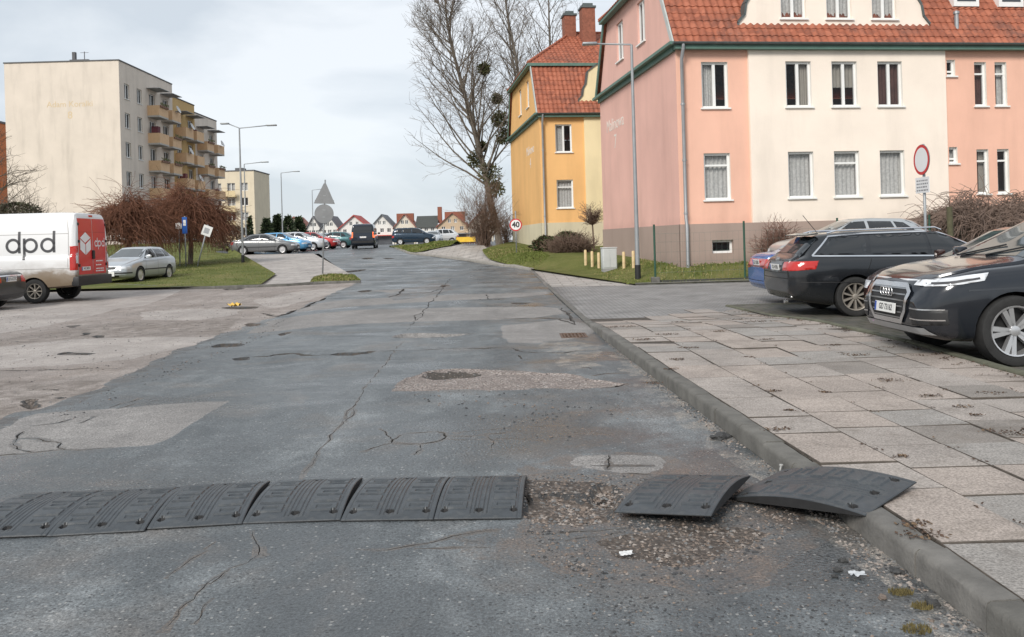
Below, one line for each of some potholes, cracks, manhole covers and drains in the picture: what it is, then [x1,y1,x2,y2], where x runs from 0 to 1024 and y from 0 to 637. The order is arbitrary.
pothole [20,399,41,410]
crack [0,418,113,456]
crack [257,279,488,474]
crack [162,532,265,633]
crack [489,308,576,325]
pothole [522,480,623,527]
